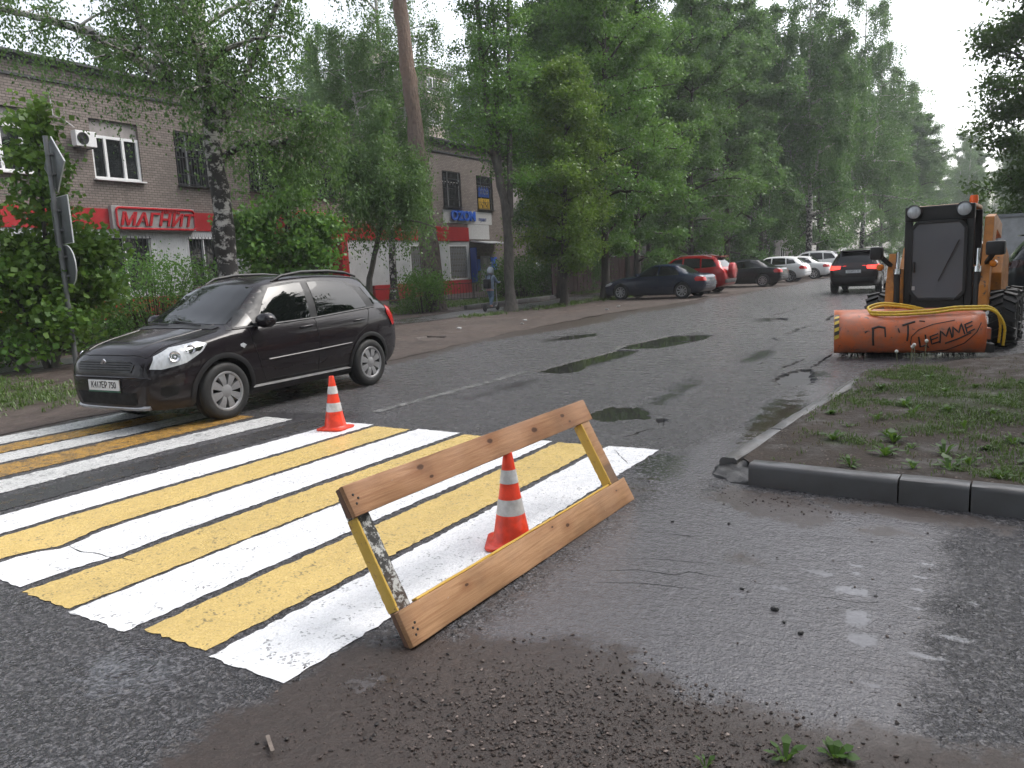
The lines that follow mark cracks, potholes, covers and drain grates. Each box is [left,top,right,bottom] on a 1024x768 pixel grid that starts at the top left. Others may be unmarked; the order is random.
pothole [536,350,639,374]
crack [597,558,725,588]
pothole [590,406,651,422]
pothole [612,335,713,349]
